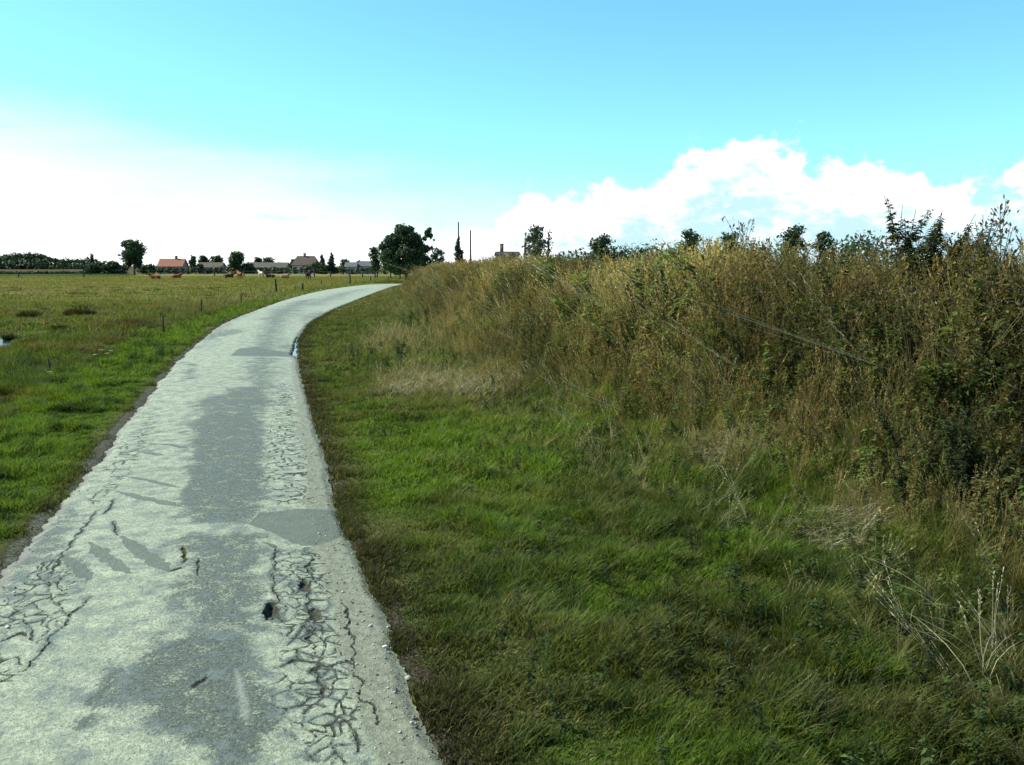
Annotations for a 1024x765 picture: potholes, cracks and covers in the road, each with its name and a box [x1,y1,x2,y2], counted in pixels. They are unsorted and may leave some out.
pothole [262,602,279,620]
crack [271,545,380,764]
crack [264,388,317,505]
pothole [298,578,313,592]
crack [0,416,156,682]
